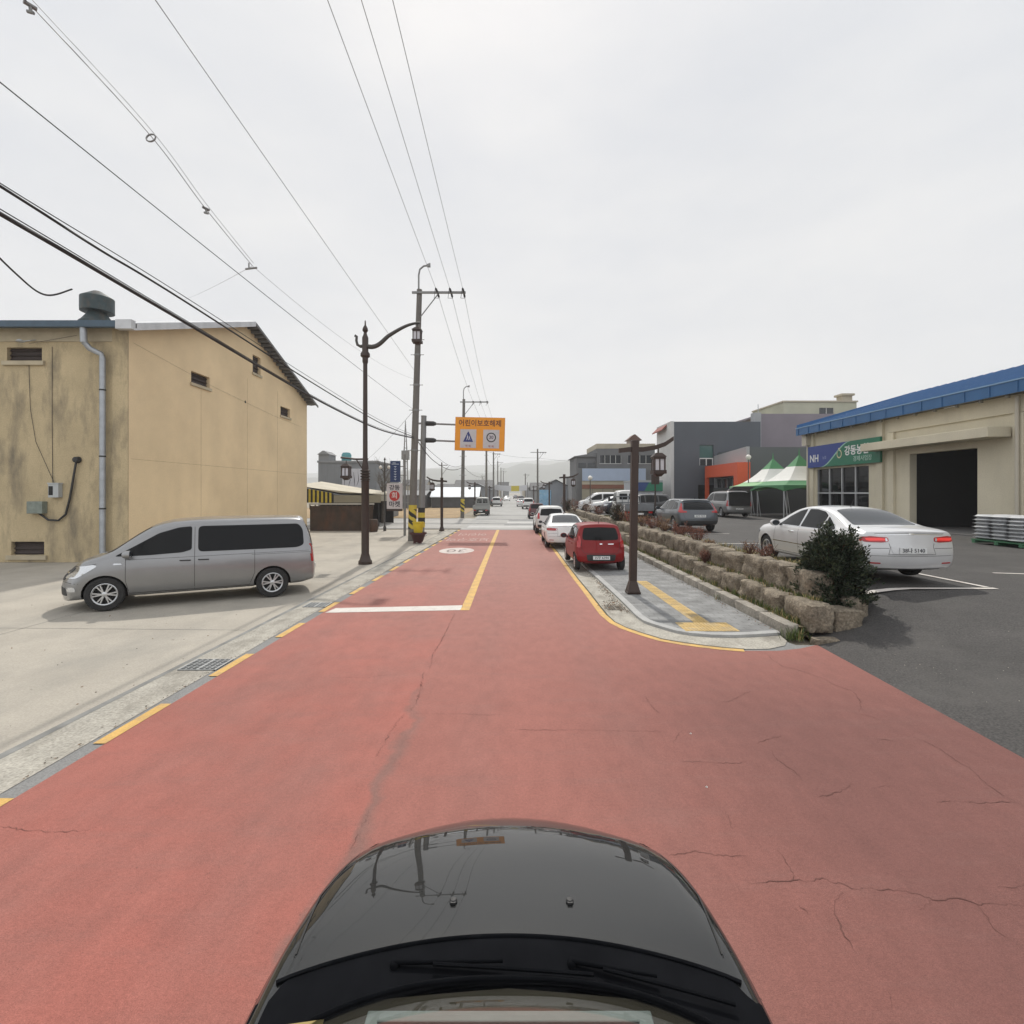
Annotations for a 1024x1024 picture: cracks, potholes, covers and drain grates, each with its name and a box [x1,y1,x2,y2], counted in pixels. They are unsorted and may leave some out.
drain grate [177,659,234,671]
crack [749,849,1024,952]
crack [768,655,1021,805]
